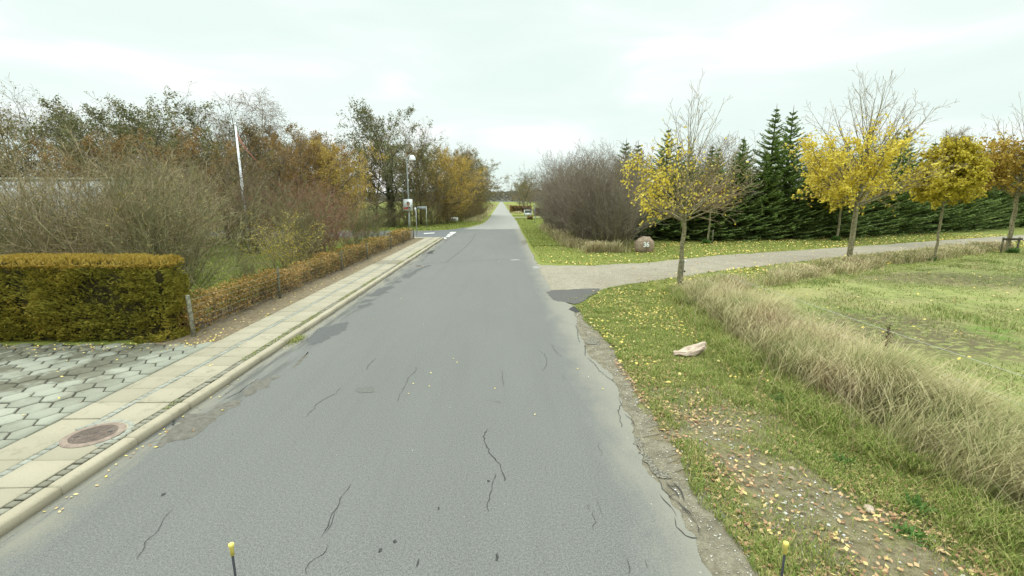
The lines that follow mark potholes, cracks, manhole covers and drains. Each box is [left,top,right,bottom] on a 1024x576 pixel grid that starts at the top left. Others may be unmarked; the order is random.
manhole cover [59,422,127,448]
crack [658,479,699,538]
crack [483,431,506,511]
crack [305,484,351,571]
